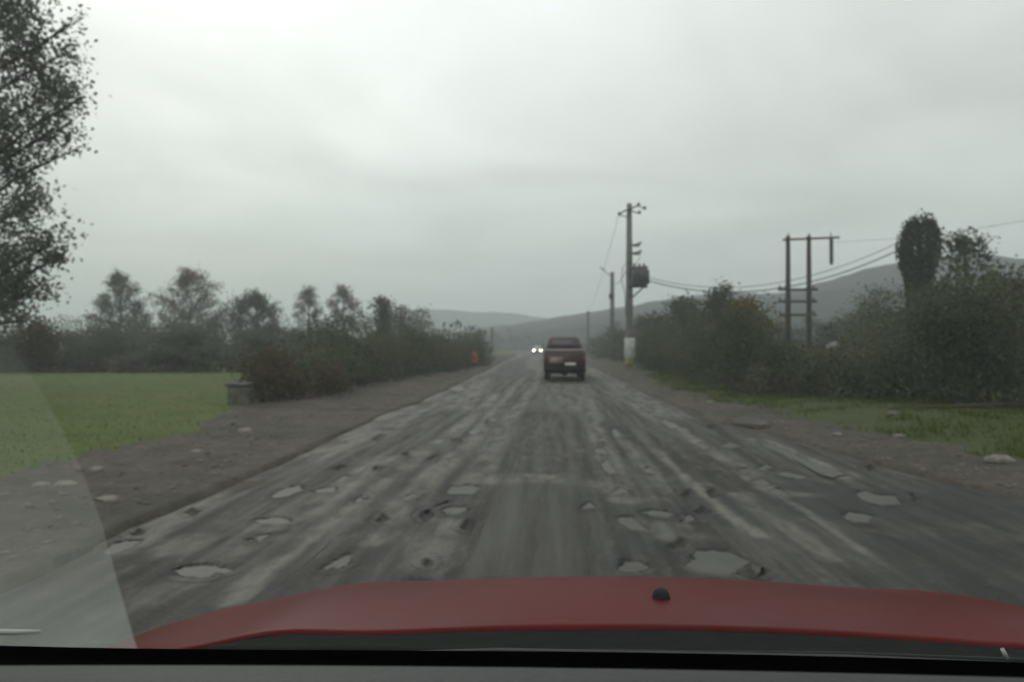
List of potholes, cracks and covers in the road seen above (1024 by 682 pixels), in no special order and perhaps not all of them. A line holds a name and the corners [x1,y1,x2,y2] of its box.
pothole [88,535,156,559]
pothole [452,516,483,535]
pothole [411,506,441,524]
pothole [571,499,605,512]
pothole [309,549,365,575]
pothole [437,482,488,496]
pothole [244,514,304,527]
pothole [846,488,914,507]
pothole [605,556,662,576]
pothole [159,560,247,583]
pothole [672,546,763,579]
pothole [830,508,885,525]
